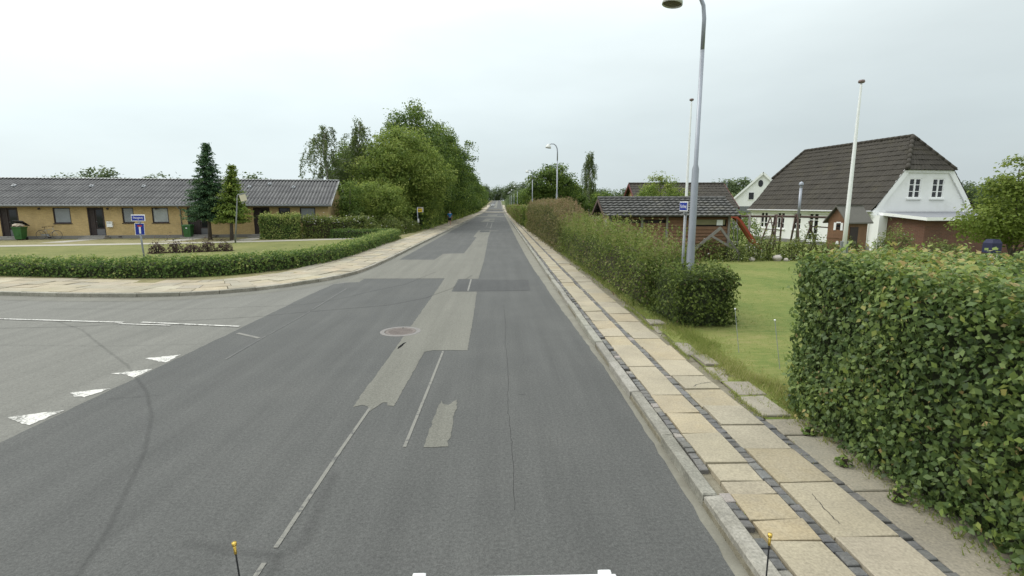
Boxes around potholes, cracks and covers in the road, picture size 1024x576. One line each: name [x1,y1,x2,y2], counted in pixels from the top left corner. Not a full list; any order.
manhole cover [380,327,421,337]
